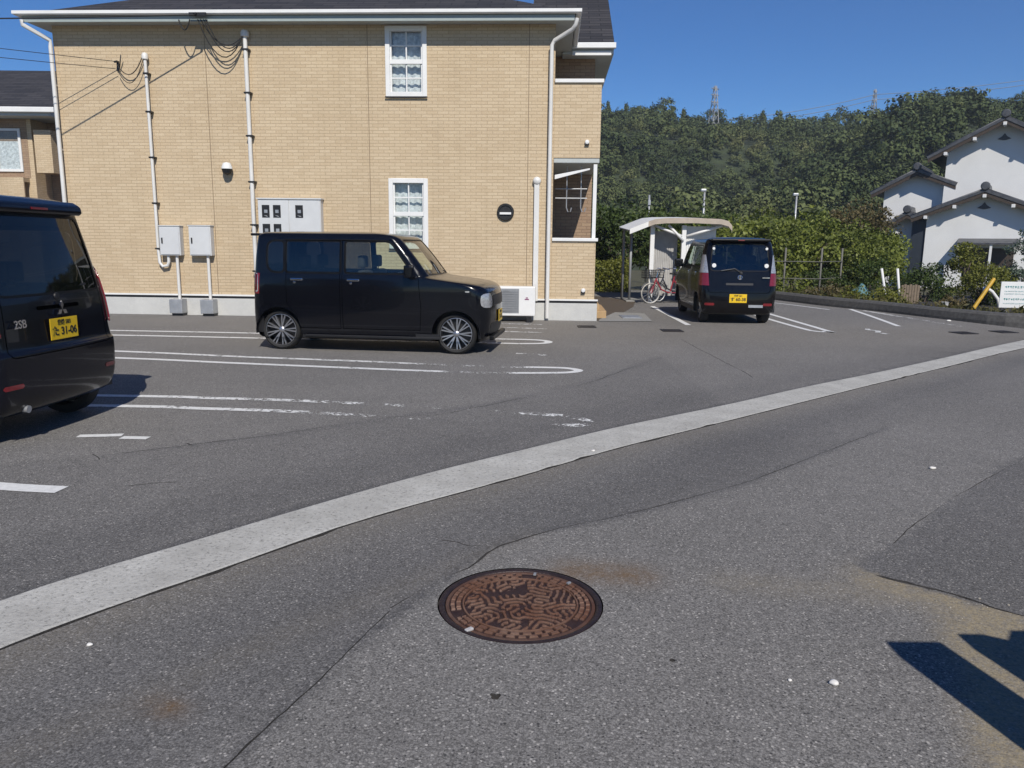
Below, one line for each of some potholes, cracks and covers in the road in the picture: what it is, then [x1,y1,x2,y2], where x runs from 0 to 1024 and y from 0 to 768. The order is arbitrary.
manhole cover [439,569,602,644]
